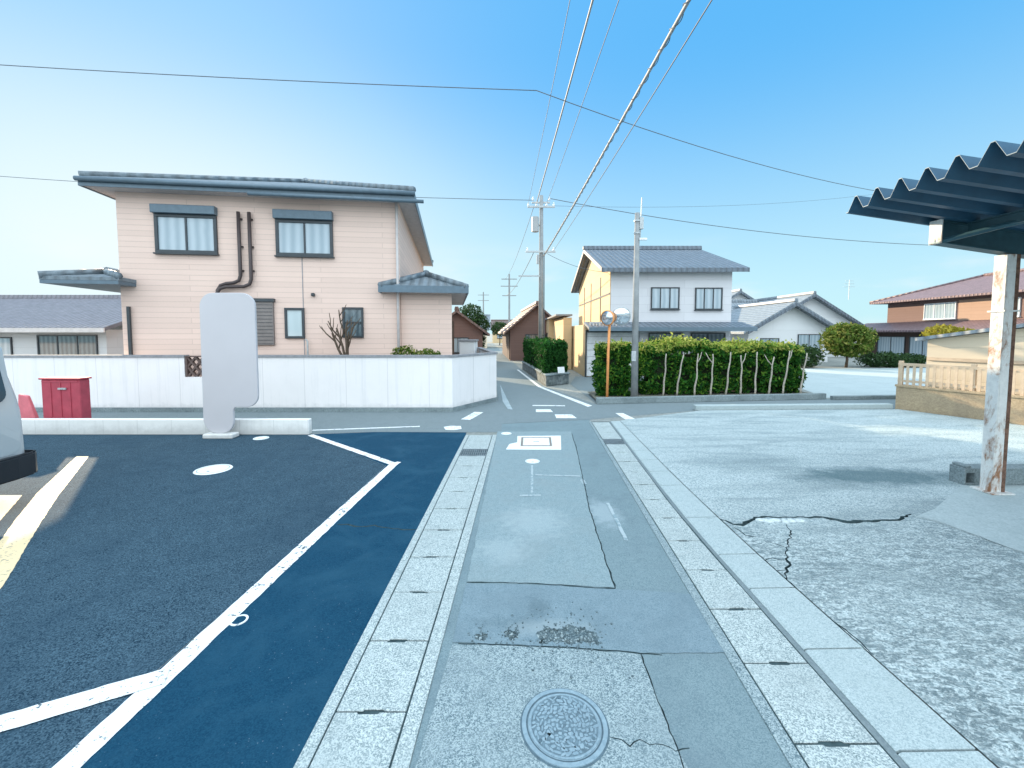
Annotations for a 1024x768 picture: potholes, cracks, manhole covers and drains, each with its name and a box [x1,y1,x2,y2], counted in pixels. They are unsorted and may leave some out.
crack [610,737,689,752]
pothole [498,614,520,649]
pothole [507,602,634,679]
pothole [467,624,497,650]
manhole cover [520,688,610,768]
crack [720,514,911,658]
